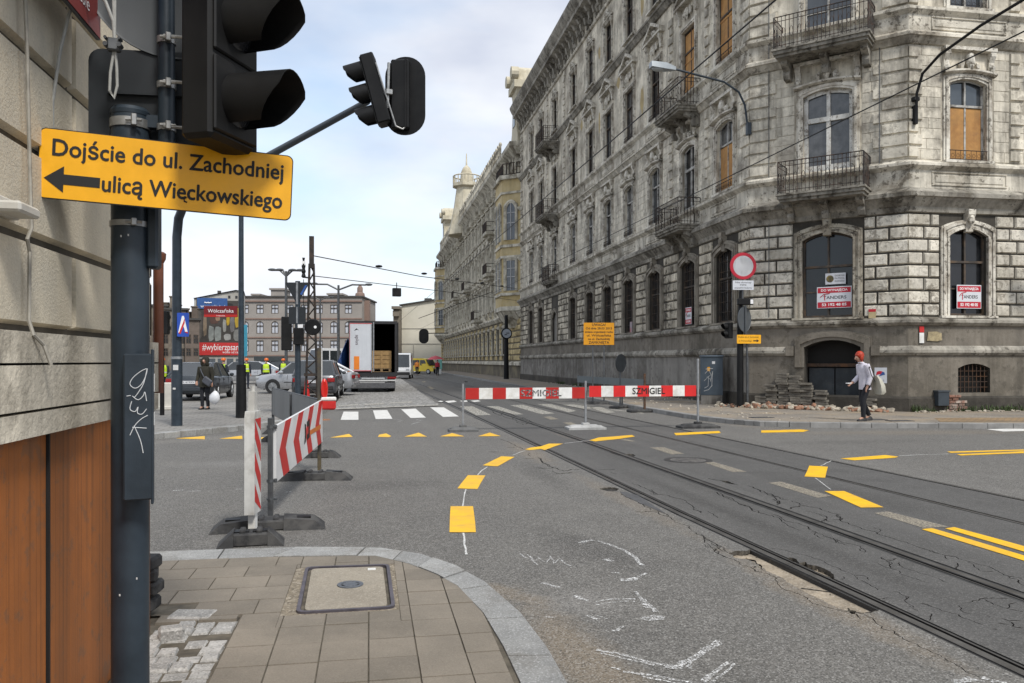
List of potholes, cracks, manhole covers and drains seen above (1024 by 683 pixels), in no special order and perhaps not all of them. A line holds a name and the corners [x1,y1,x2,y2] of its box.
manhole cover [280,564,400,616]
pothole [729,549,879,614]
crack [621,479,1024,678]
